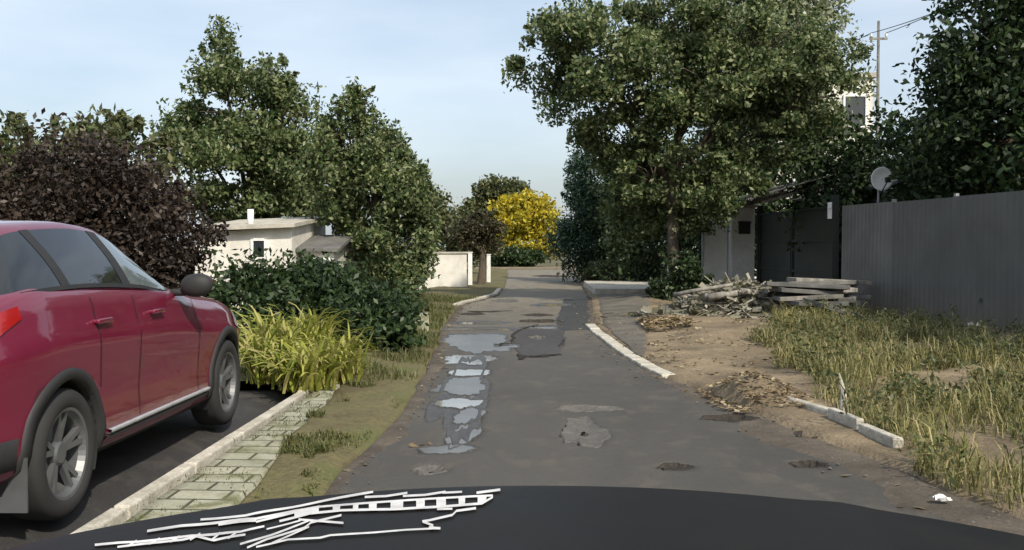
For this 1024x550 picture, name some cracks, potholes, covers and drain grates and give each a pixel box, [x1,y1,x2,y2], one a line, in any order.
pothole [412,464,447,475]
pothole [789,460,830,468]
pothole [657,463,695,471]
pothole [699,414,760,422]
